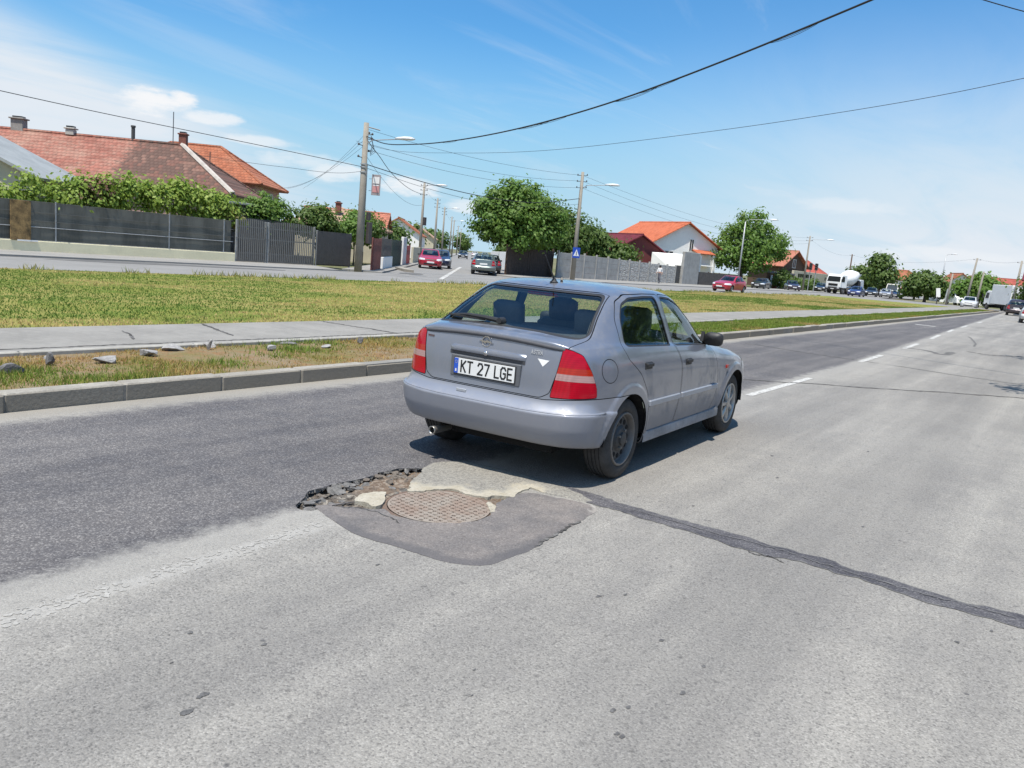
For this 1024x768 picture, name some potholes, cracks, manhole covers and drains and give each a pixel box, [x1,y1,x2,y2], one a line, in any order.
manhole cover [382,490,491,523]
pothole [297,470,502,511]
